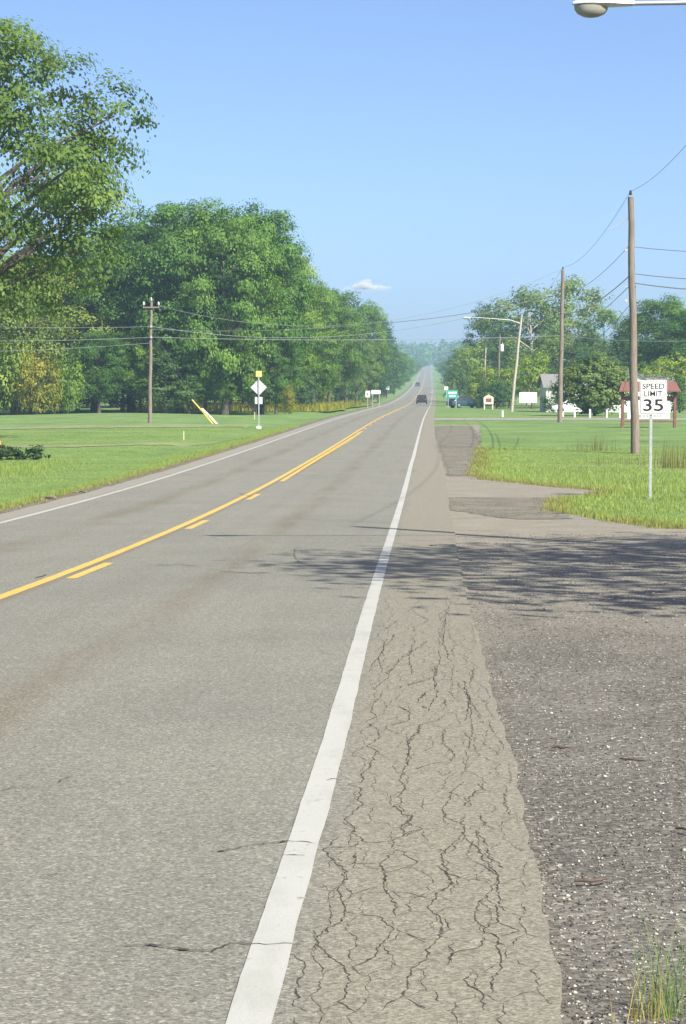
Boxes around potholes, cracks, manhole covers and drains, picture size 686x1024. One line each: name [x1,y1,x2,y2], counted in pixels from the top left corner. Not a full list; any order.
crack [123,575,551,1024]
